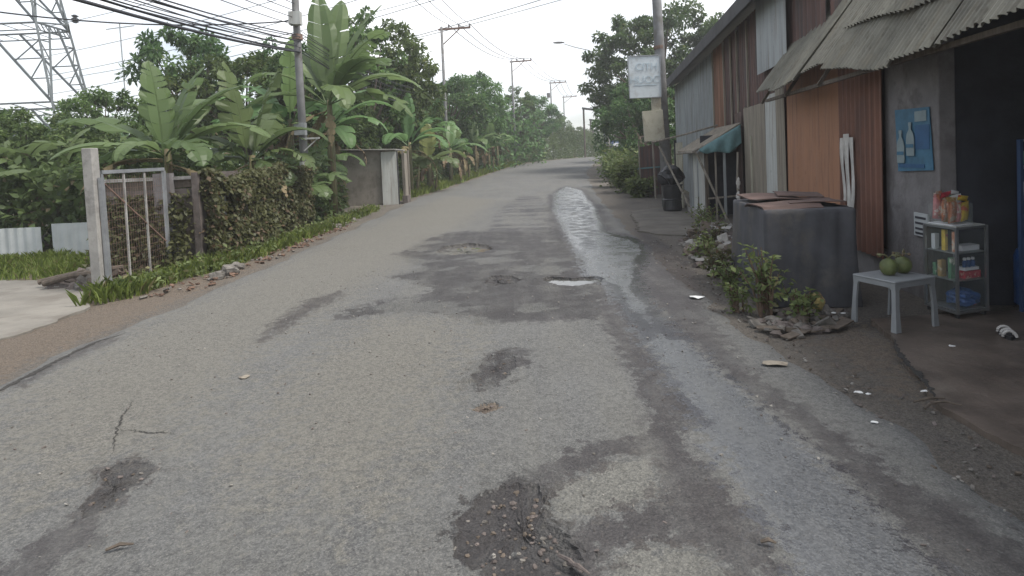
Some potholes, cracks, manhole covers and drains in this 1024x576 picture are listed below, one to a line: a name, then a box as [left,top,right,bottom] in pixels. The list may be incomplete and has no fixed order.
pothole [535,275,612,289]
pothole [463,351,525,391]
crack [110,402,174,455]
pothole [429,242,500,257]
pothole [478,274,528,288]
pothole [444,479,590,576]
pothole [71,457,162,525]
